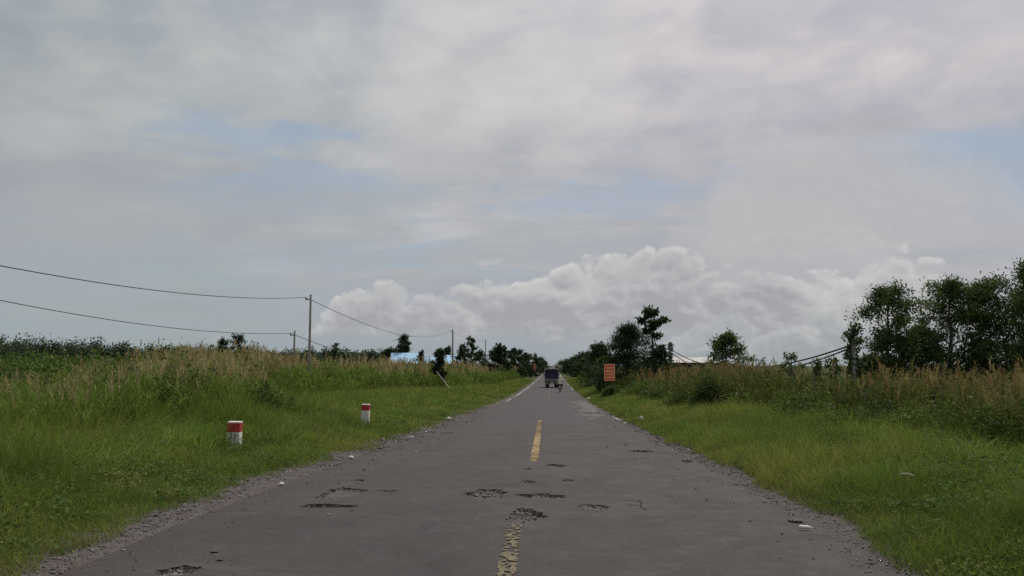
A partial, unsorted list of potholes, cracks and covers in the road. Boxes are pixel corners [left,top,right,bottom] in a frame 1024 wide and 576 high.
pothole [316,487,368,500]
pothole [506,508,548,524]
pothole [464,489,506,500]
pothole [155,565,203,576]
